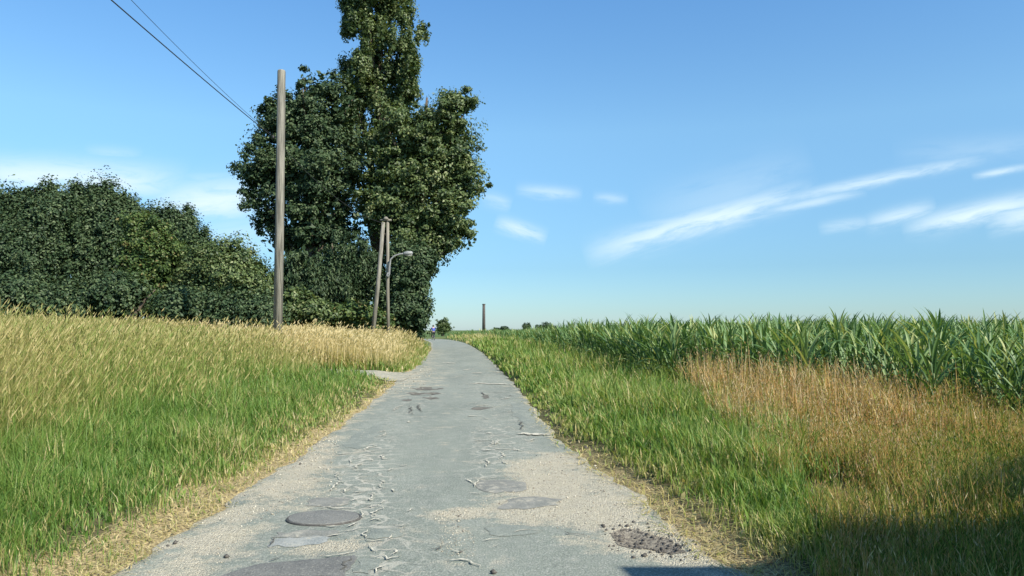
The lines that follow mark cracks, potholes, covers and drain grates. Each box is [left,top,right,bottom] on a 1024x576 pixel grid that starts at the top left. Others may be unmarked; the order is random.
crack [323,430,412,571]
crack [429,547,480,565]
manhole cover [286,510,362,526]
pothole [611,528,686,554]
crack [444,362,551,494]
